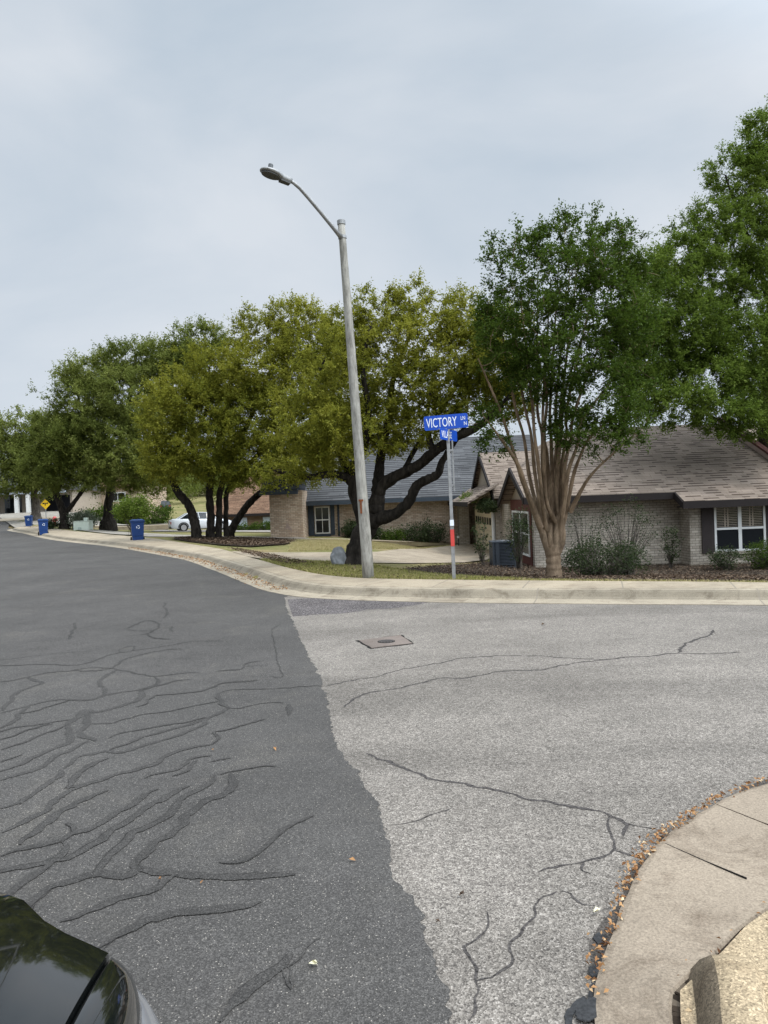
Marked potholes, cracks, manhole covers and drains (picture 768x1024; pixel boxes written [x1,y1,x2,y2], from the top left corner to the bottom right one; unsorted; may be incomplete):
crack [462,891,594,1021]
manhole cover [355,635,414,649]
crack [219,624,284,678]
crack [327,630,737,708]
crack [366,753,657,874]
